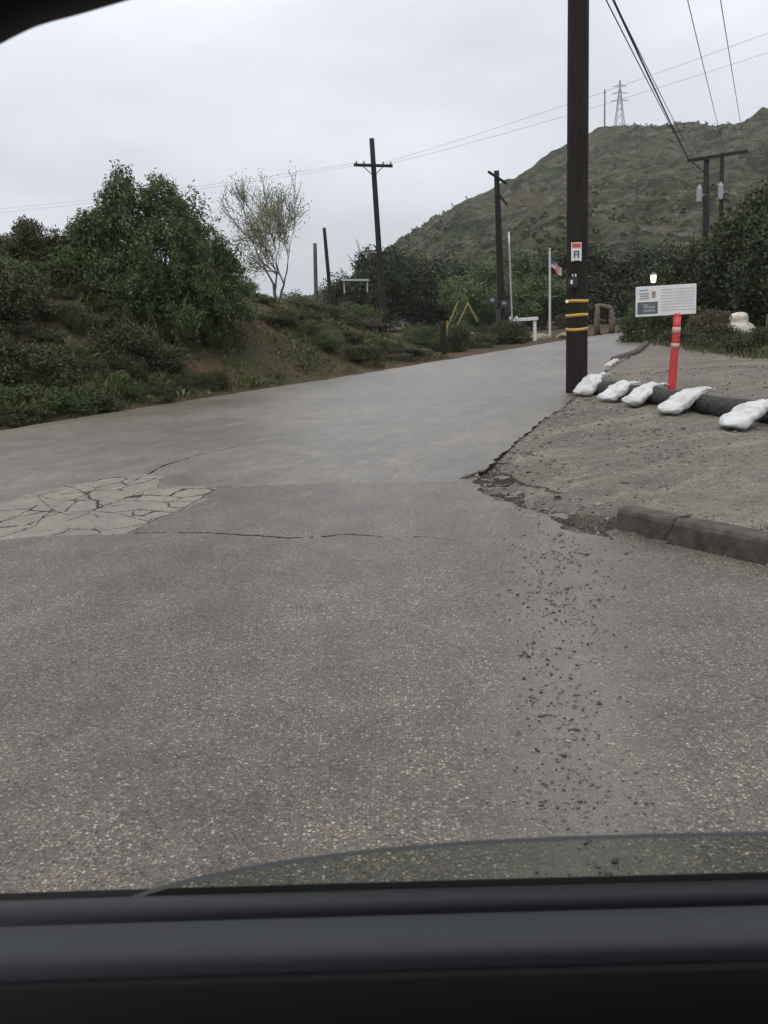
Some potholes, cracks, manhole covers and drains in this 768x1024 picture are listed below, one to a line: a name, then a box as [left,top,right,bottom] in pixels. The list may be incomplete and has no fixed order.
pothole [472,472,616,540]
crack [0,436,457,540]
